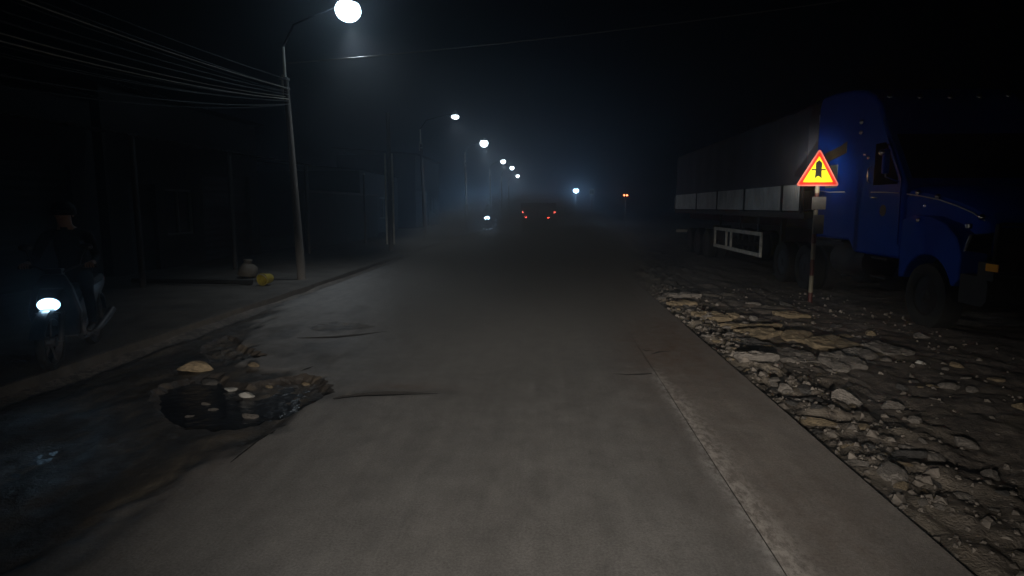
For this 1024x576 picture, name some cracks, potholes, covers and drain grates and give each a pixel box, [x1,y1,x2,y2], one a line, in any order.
pothole [147,372,335,432]
pothole [197,335,268,365]
crack [333,391,439,399]
